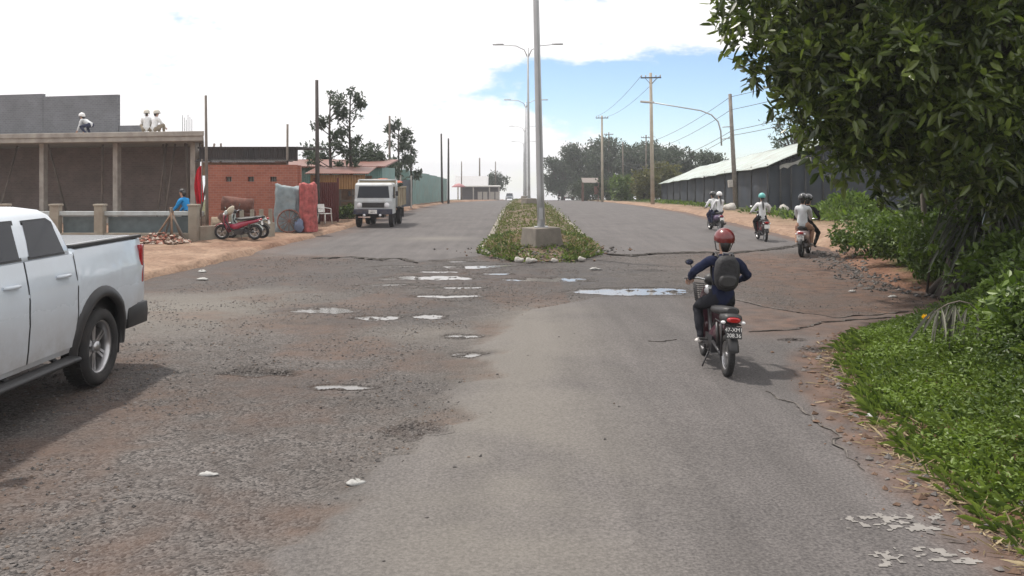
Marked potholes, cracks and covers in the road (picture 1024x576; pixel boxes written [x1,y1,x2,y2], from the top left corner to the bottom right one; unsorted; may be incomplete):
crack [766,391,865,471]
pothole [556,286,698,296]
pothole [283,305,362,314]
pothole [306,383,382,391]
crack [312,256,418,264]
pothole [449,351,491,359]
crack [735,299,909,332]
